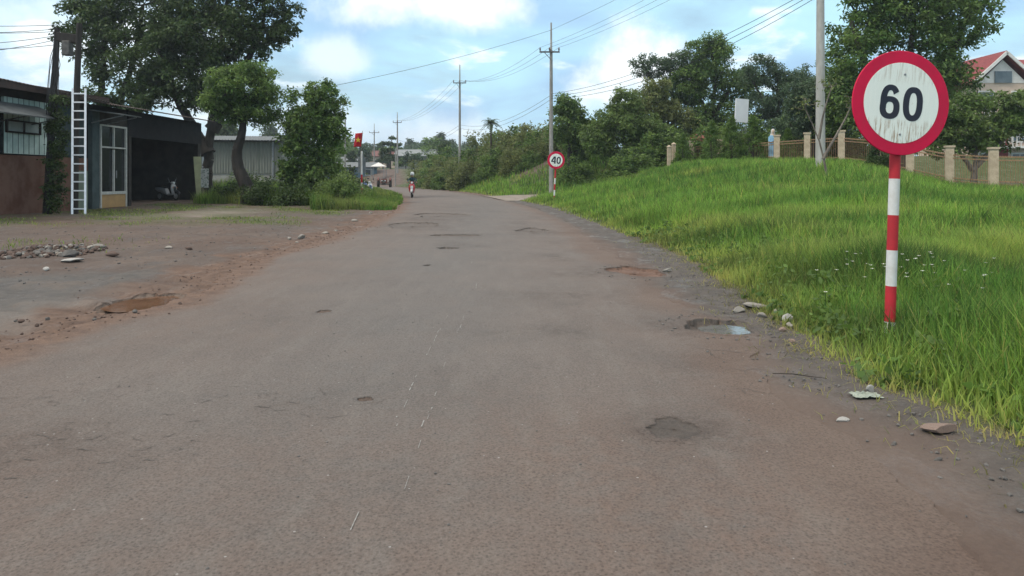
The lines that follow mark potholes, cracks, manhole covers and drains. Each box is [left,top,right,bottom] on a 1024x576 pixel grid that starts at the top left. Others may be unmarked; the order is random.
pothole [598,265,671,278]
crack [164,388,345,421]
pothole [678,317,760,336]
pothole [86,292,193,315]
pothole [634,413,712,445]
pothole [508,226,556,234]
